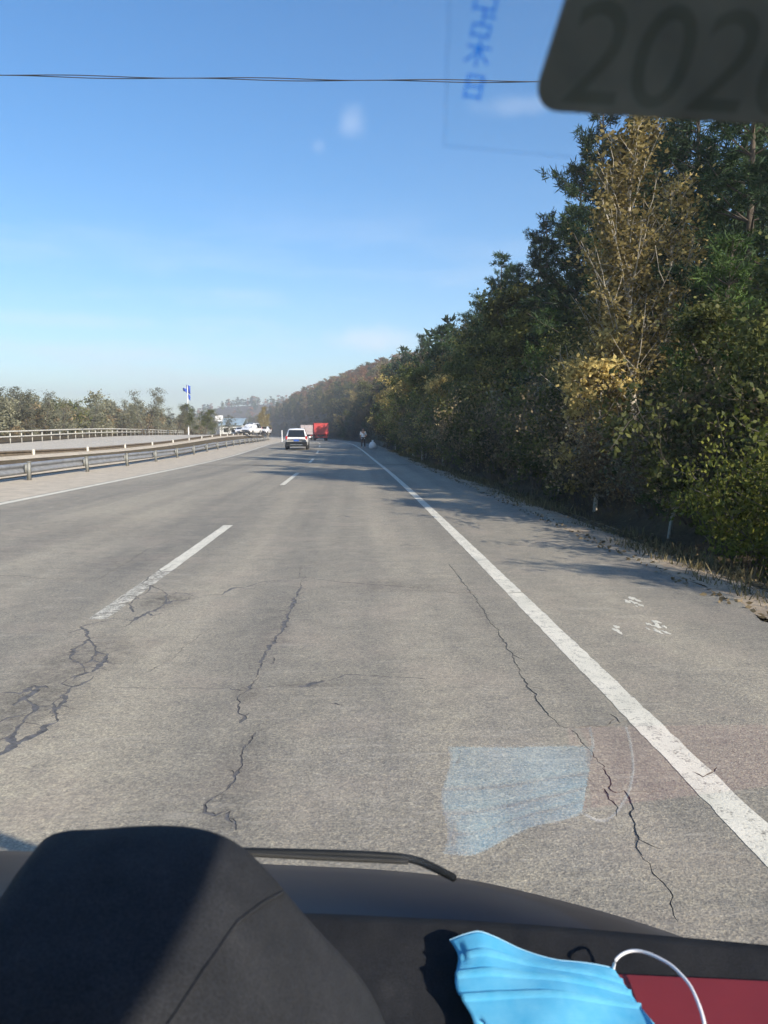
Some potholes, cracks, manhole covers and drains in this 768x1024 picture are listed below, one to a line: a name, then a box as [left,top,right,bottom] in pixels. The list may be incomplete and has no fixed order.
crack [444,564,678,922]
crack [0,540,424,830]
